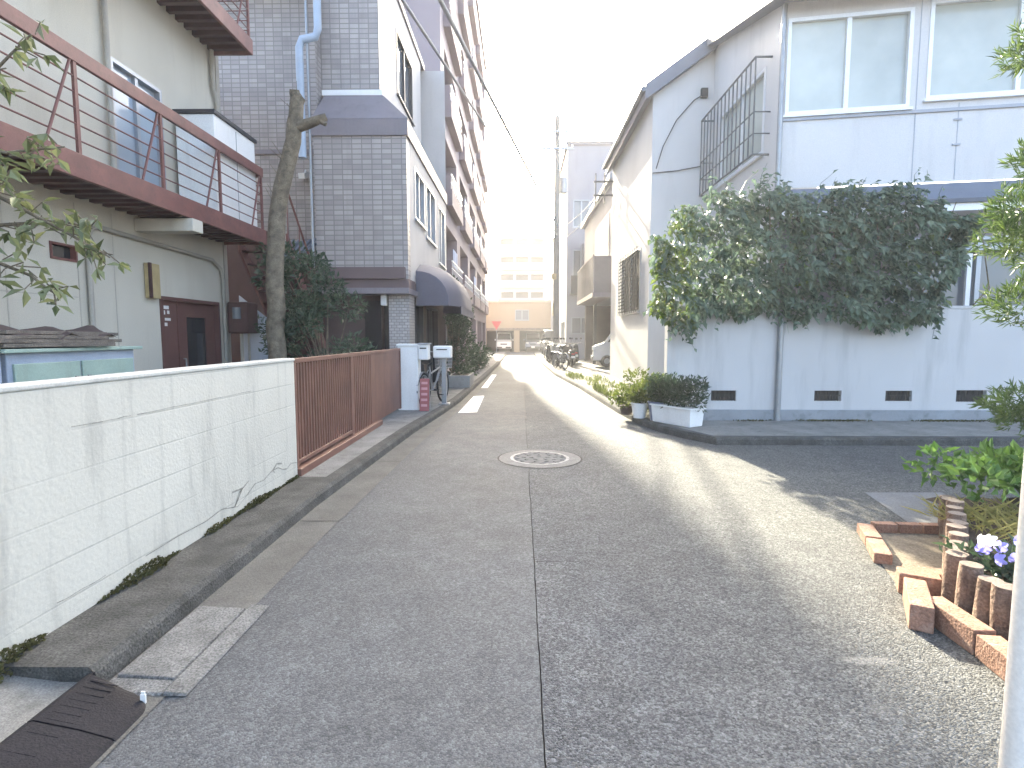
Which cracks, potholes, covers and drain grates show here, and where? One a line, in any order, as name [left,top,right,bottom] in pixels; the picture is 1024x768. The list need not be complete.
manhole cover [497,449,582,468]
